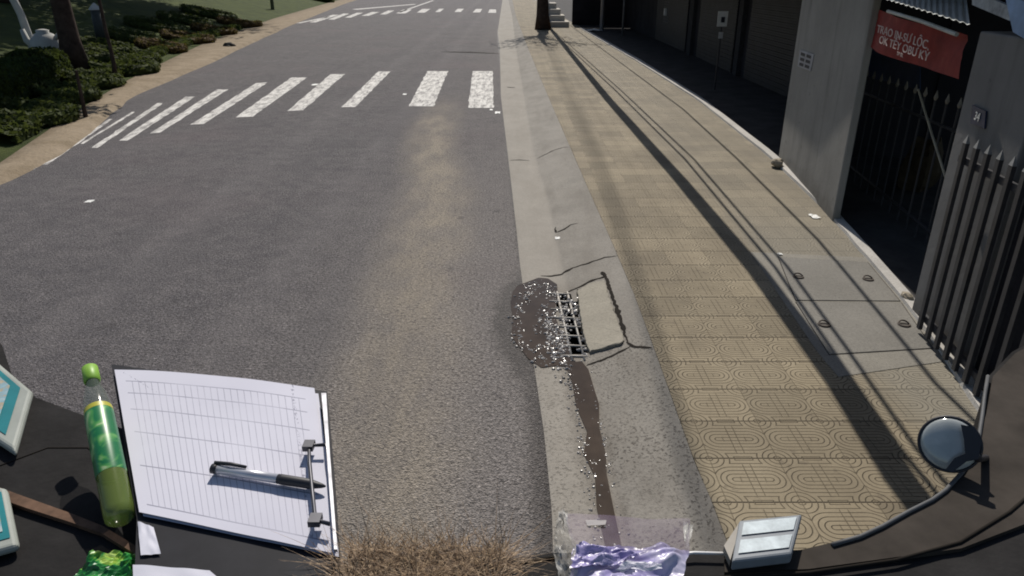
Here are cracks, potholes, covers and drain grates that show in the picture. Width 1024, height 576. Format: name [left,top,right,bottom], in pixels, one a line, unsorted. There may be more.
utility cover [796,302,934,355]
drain grate [548,291,589,361]
utility cover [778,257,900,301]
crack [548,256,652,365]
